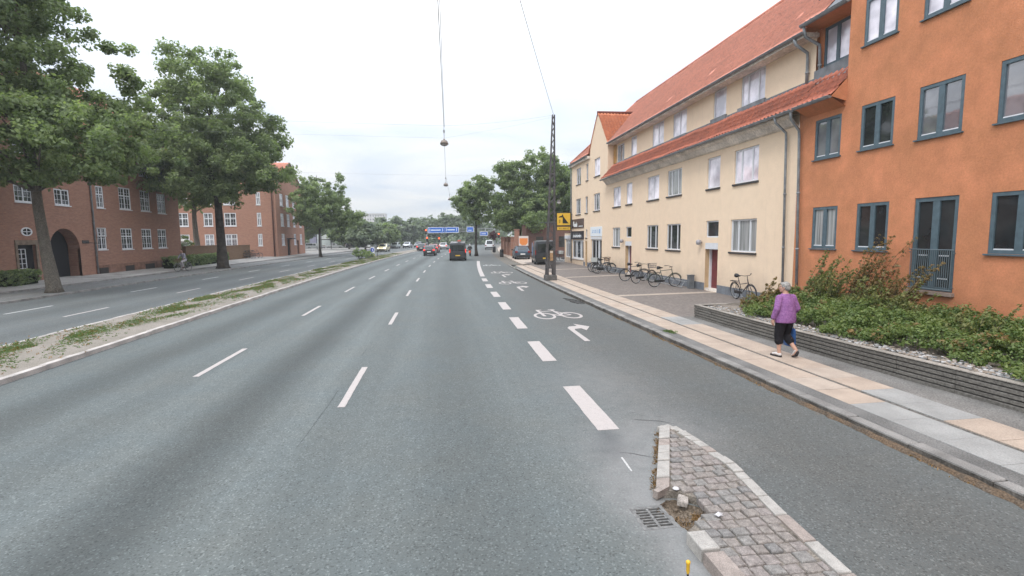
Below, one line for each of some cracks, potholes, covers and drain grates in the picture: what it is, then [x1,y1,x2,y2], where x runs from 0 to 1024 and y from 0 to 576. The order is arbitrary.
drain grate [629,505,679,530]
